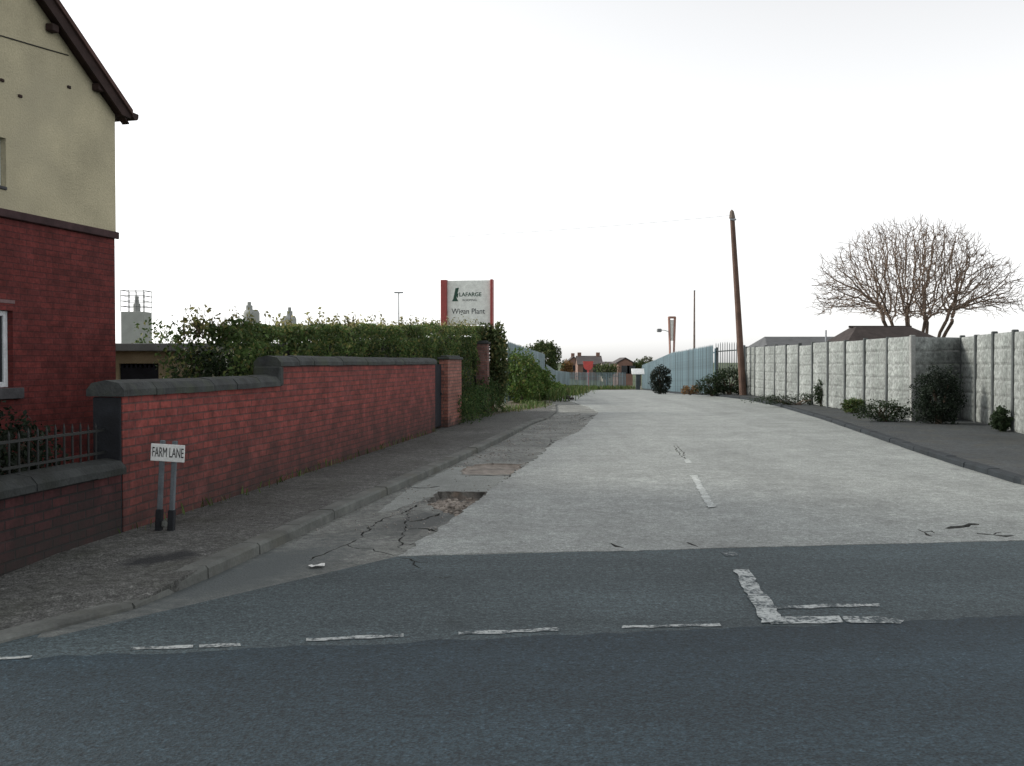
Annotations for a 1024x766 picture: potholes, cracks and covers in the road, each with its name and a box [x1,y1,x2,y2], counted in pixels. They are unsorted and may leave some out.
pothole [427,491,487,516]
crack [309,486,452,578]
crack [919,523,1015,537]
